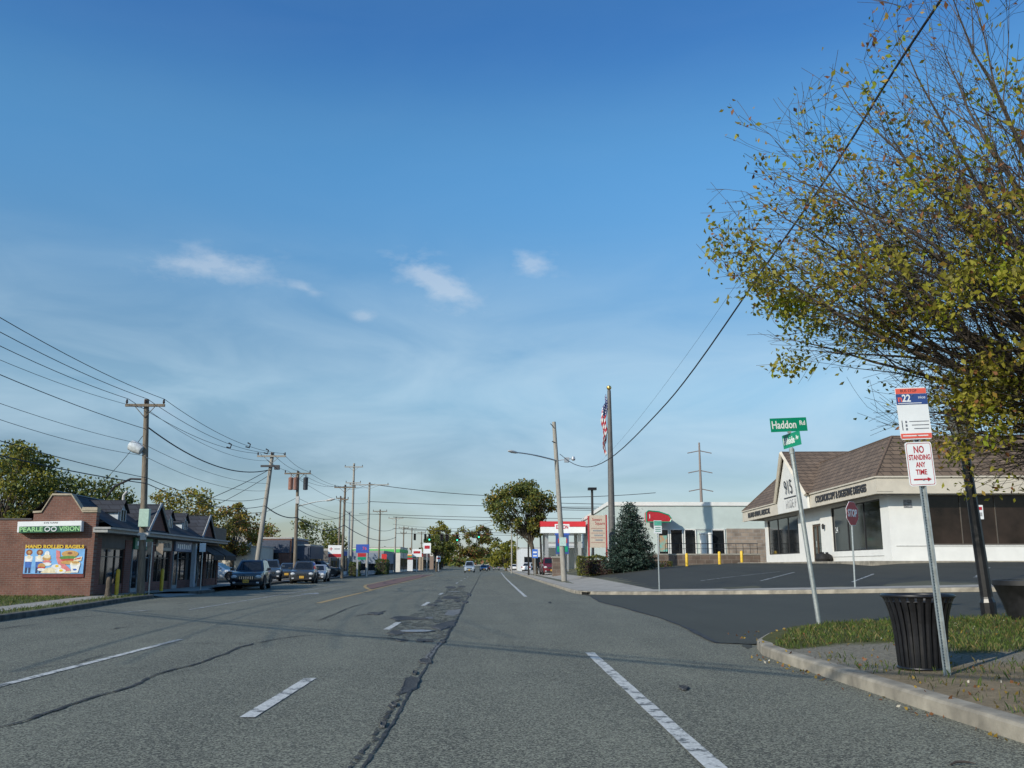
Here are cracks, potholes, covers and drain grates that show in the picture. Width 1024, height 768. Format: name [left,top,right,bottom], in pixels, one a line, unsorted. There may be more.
crack [416,604,464,671]
crack [348,691,401,768]
